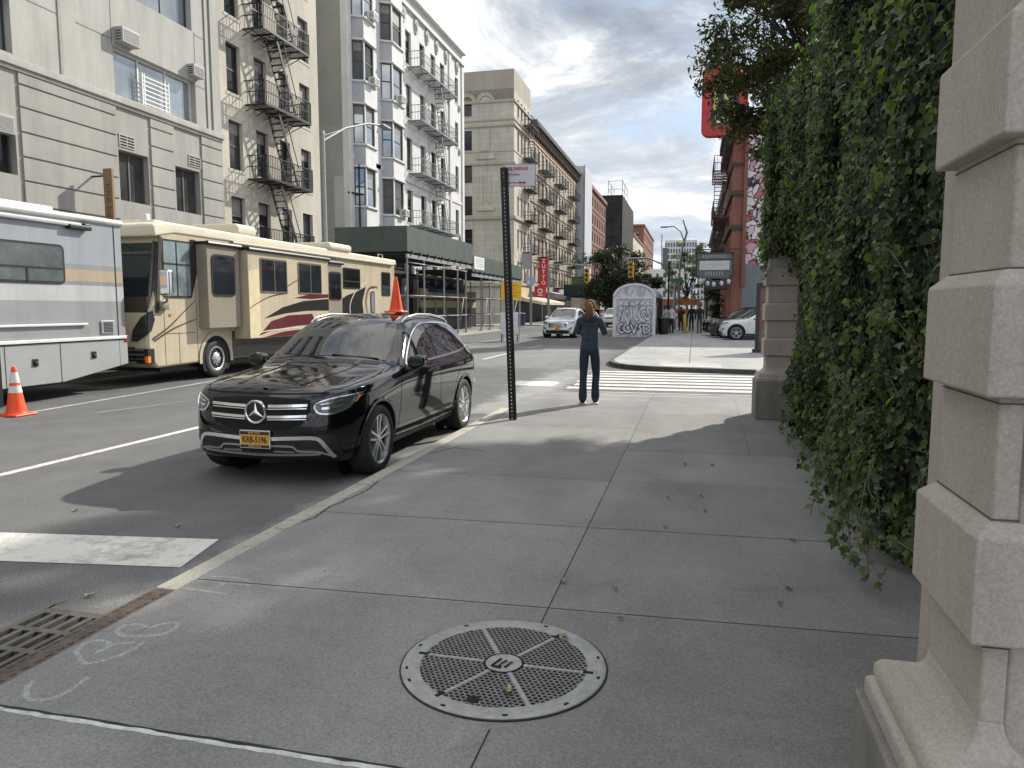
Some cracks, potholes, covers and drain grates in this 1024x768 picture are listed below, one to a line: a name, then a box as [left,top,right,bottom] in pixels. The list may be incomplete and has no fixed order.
manhole cover [399,620,608,722]
drain grate [0,588,175,685]
